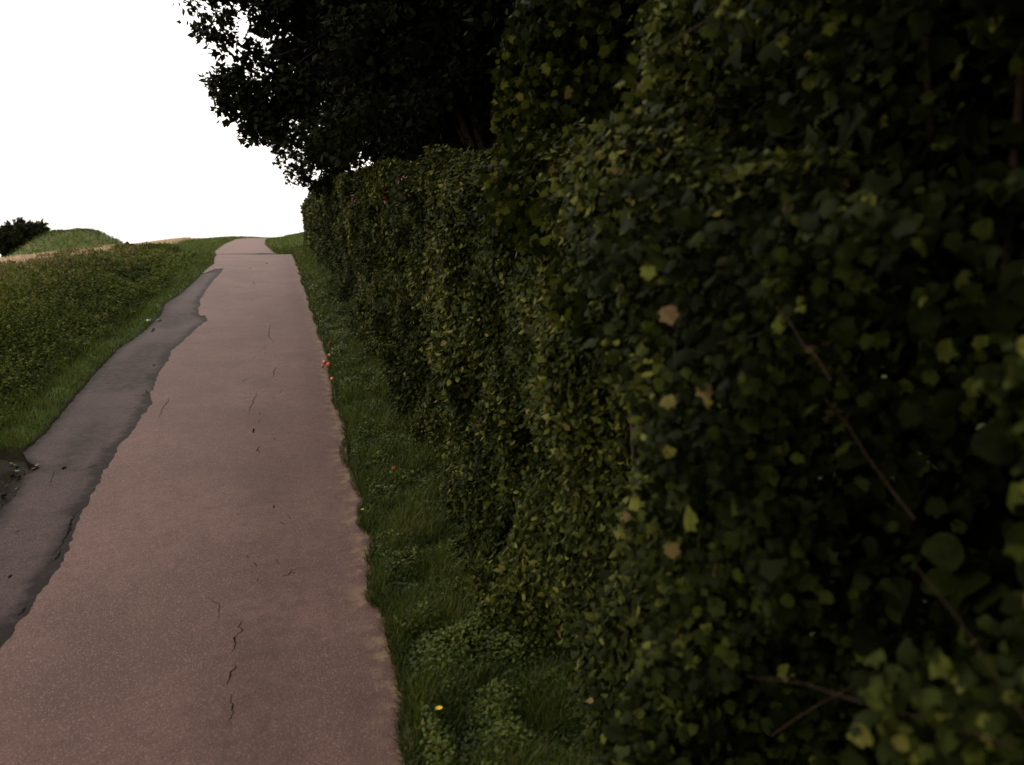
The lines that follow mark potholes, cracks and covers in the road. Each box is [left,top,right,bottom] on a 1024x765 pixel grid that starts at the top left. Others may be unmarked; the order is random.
crack [52,512,78,562]
crack [211,600,243,726]
